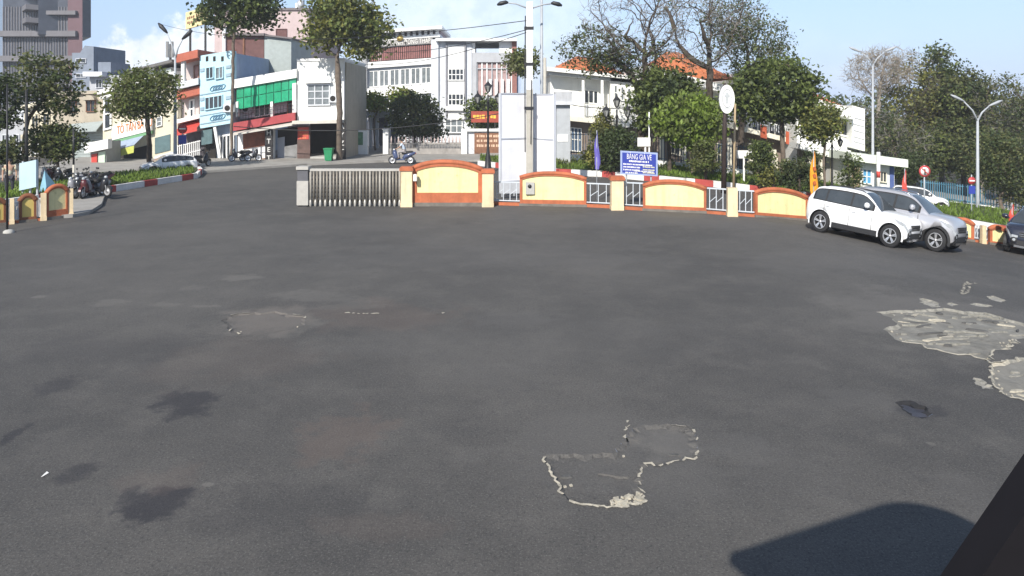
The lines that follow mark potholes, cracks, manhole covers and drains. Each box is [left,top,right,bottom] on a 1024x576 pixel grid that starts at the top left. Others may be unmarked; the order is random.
pothole [542,424,699,509]
pothole [221,311,306,335]
pothole [895,400,932,418]
